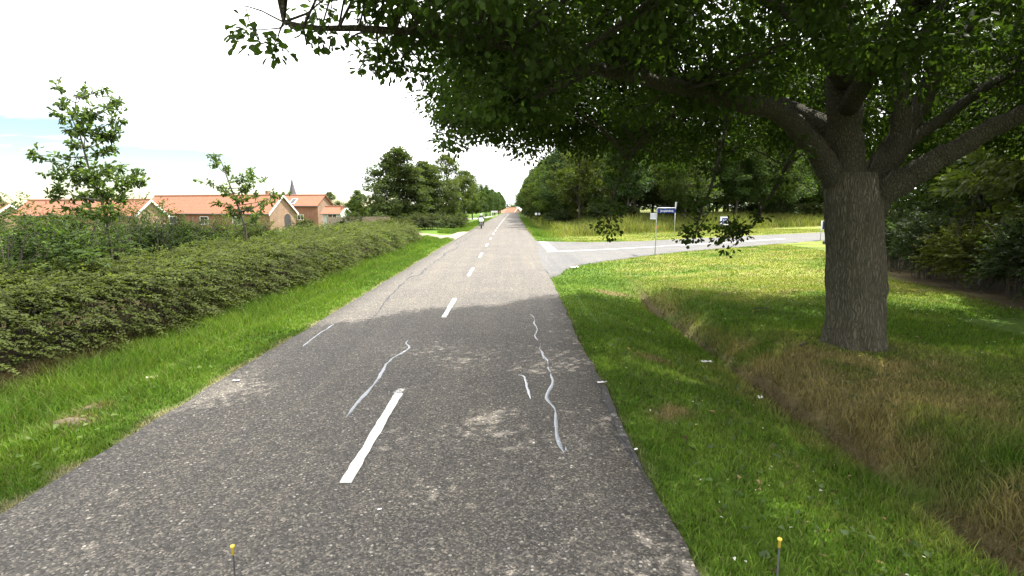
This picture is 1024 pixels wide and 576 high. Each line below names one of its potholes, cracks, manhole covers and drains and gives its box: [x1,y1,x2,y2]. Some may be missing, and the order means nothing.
crack [336,233,475,325]
